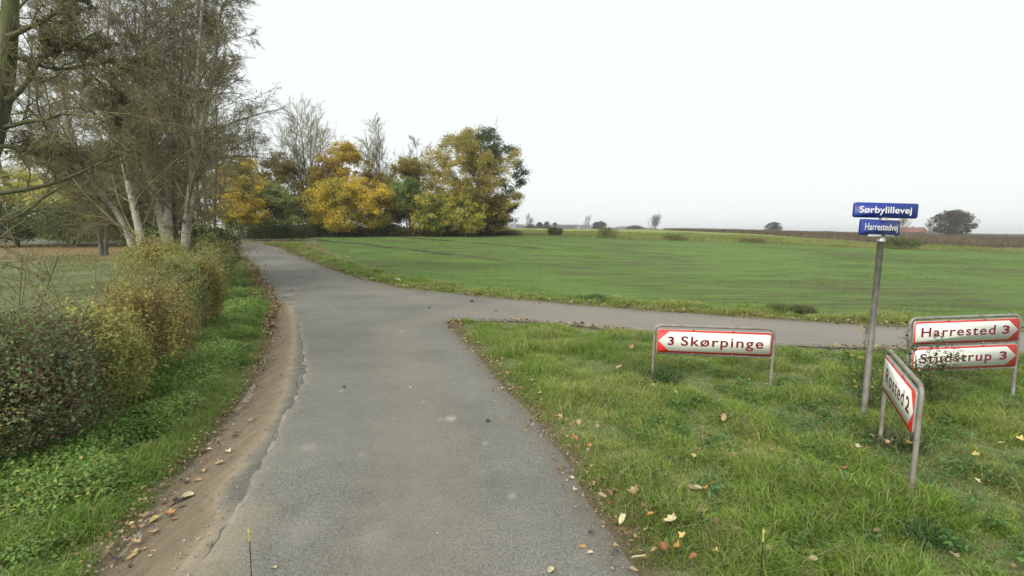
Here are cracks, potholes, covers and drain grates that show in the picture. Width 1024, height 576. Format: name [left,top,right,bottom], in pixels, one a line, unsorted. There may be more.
crack [201,324,308,561]
